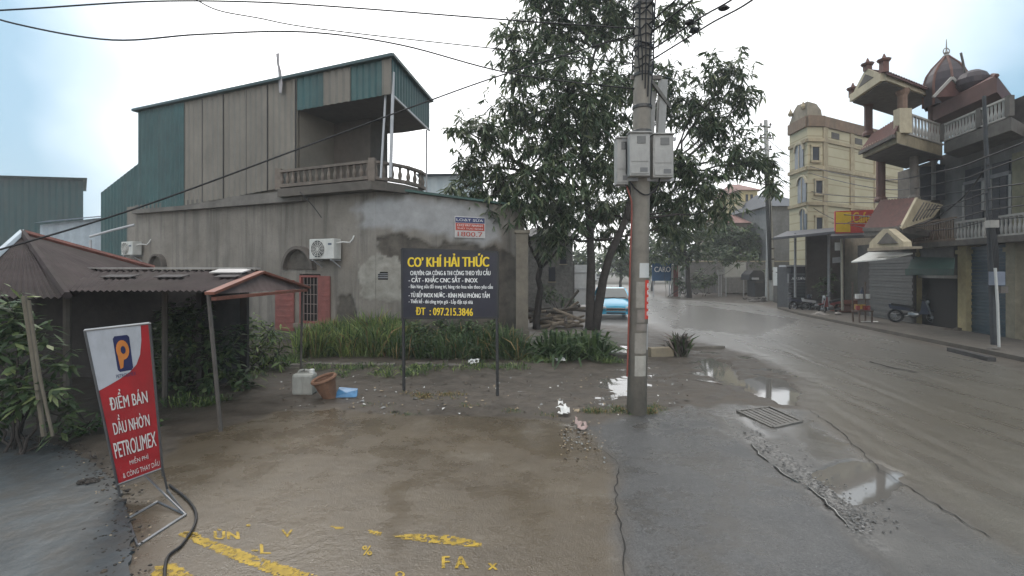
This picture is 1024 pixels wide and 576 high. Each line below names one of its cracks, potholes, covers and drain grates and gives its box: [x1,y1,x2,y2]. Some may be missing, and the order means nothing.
pothole [802,457,918,508]
drain grate [736,406,803,428]
